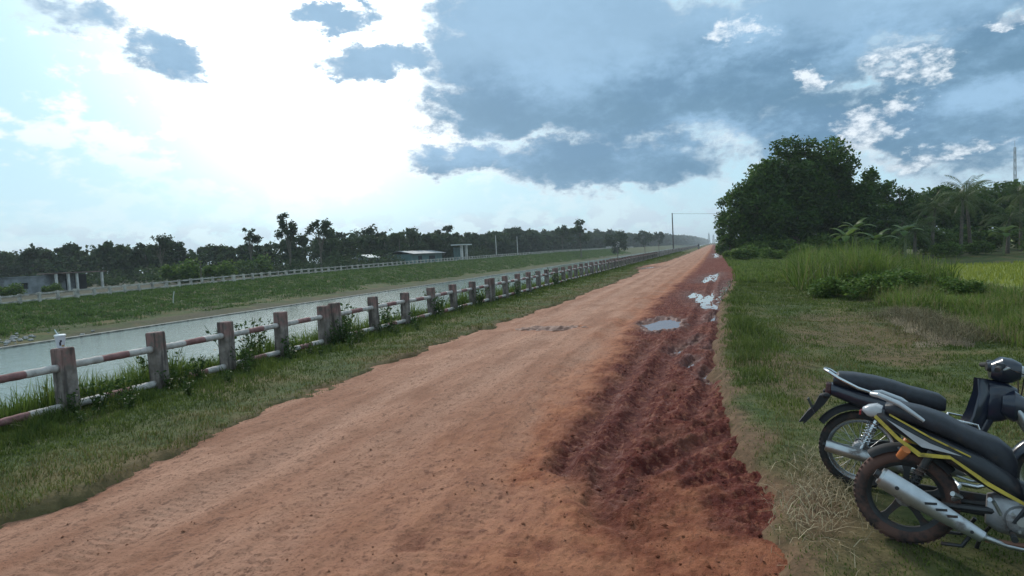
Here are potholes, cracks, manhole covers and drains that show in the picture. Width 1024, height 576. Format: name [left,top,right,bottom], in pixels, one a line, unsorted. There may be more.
pothole [637,316,689,333]
